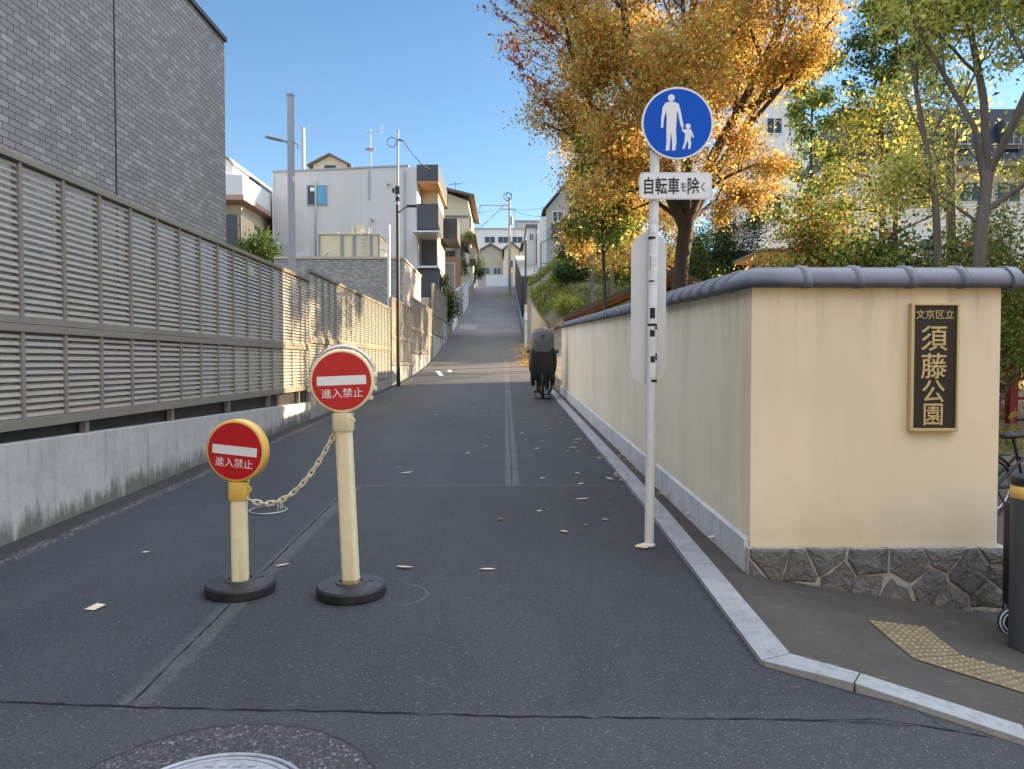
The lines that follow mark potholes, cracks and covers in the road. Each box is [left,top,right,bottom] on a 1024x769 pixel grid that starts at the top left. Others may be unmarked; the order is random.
manhole cover [89,723,375,769]
